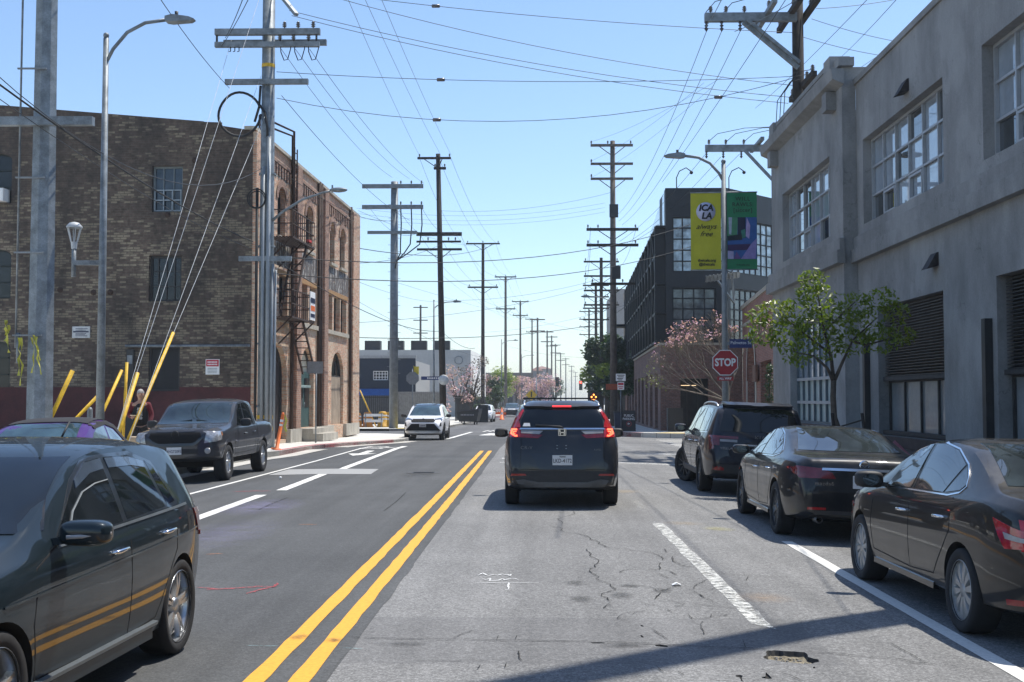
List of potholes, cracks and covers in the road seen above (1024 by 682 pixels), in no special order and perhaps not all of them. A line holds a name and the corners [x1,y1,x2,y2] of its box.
crack [550,512,777,642]
pothole [763,650,819,664]
